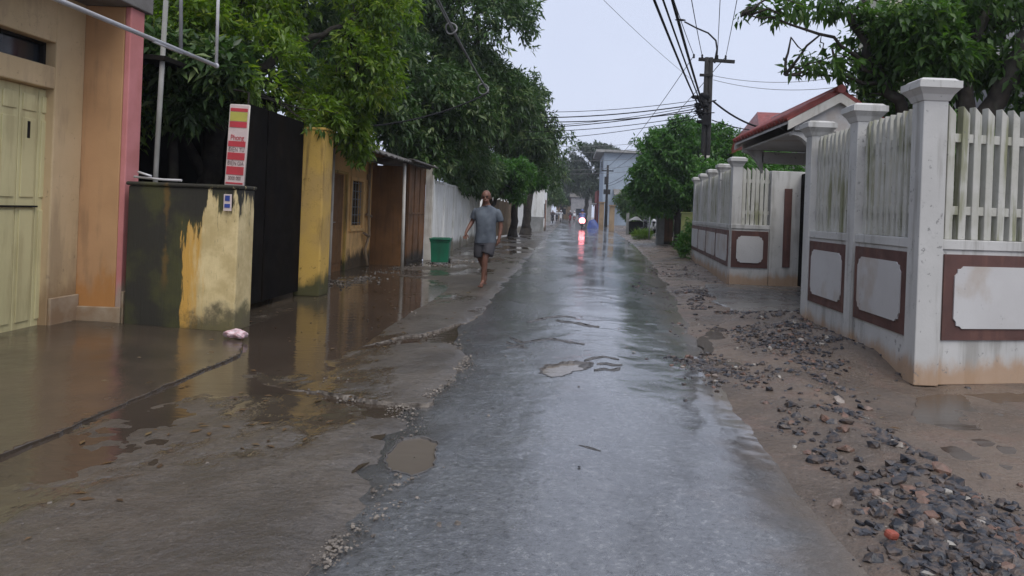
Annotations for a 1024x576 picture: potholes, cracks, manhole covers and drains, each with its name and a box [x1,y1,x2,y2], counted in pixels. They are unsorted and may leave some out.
pothole [384,435,440,476]
crack [506,315,600,348]
pothole [539,360,594,378]
